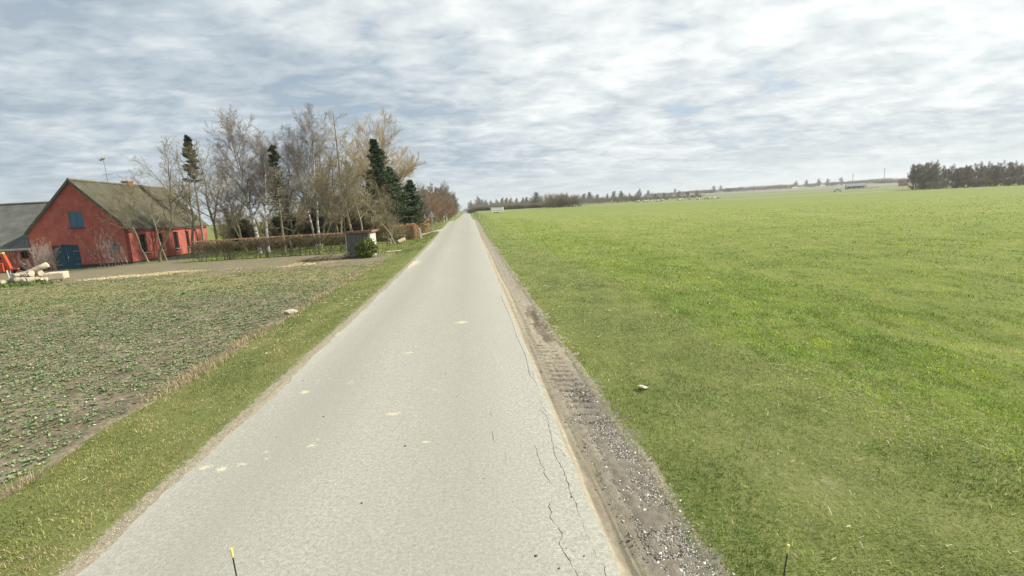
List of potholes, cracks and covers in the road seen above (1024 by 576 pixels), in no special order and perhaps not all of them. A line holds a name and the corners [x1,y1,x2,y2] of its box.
crack [534,403,606,576]
